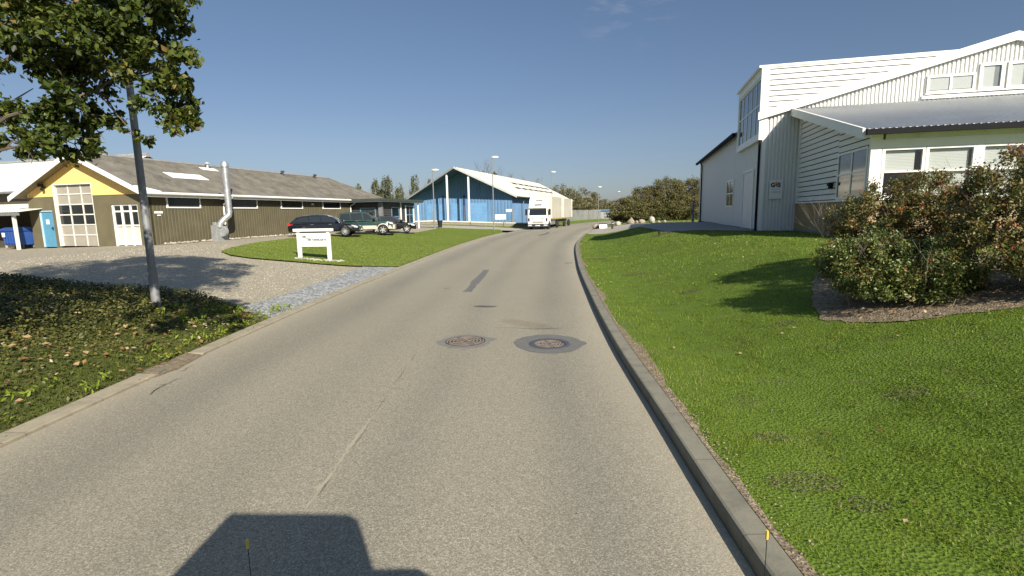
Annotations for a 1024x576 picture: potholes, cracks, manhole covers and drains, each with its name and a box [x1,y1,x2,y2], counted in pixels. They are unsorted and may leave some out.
manhole cover [445,336,485,346]
manhole cover [529,338,570,349]
